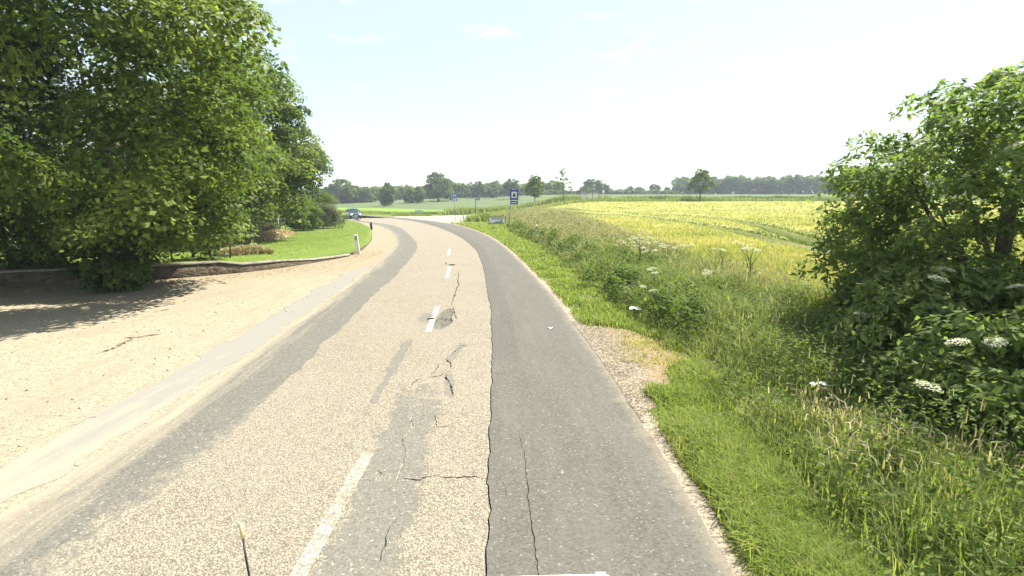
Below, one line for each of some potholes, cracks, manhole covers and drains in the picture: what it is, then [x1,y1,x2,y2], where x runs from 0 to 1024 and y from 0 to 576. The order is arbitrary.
crack [411,342,486,396]
crack [519,437,539,576]
crack [378,512,409,565]
crack [366,403,507,511]
pothole [433,308,454,330]
